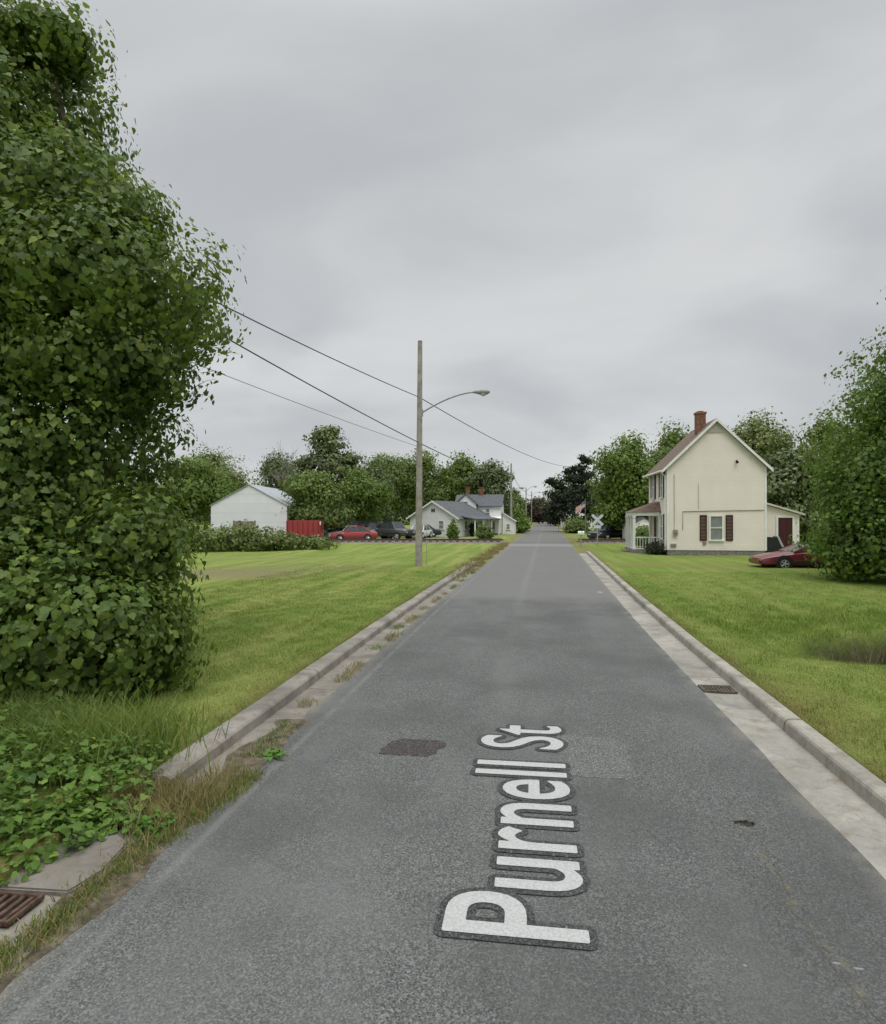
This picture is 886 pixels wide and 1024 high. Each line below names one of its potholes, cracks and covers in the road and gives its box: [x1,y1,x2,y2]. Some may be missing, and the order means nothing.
drain grate [698,684,738,694]
drain grate [0,890,45,928]
